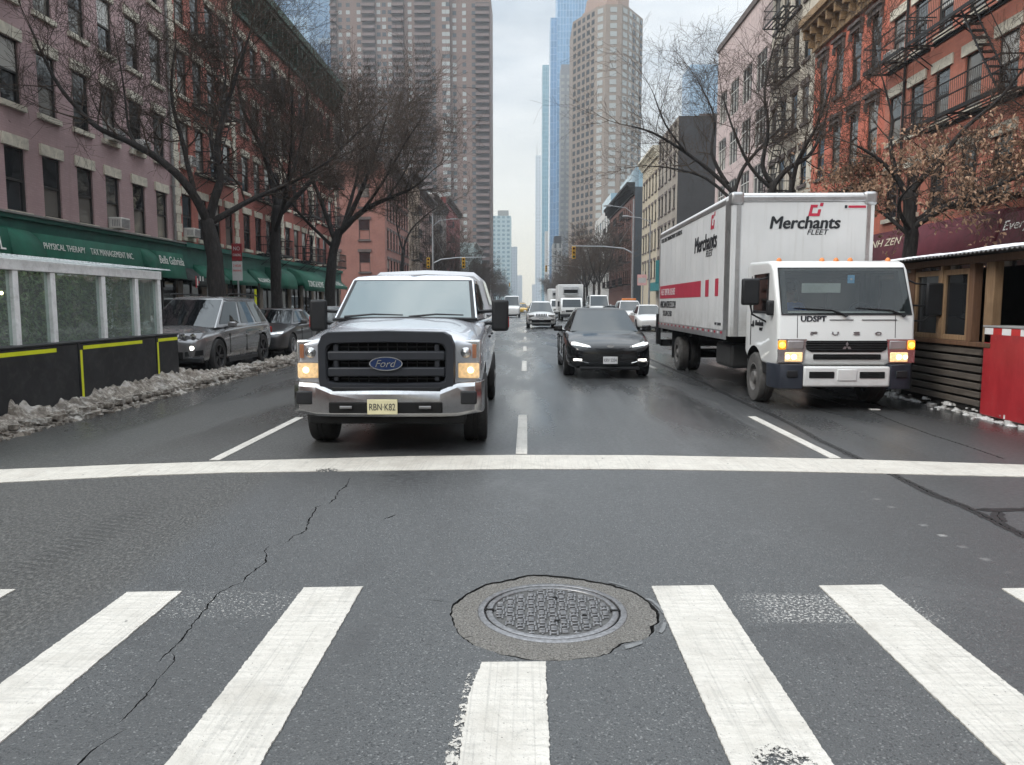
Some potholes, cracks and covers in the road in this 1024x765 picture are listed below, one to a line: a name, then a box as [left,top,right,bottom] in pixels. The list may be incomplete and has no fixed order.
crack [77,546,269,765]
manhole cover [478,583,627,643]
crack [287,479,349,542]
